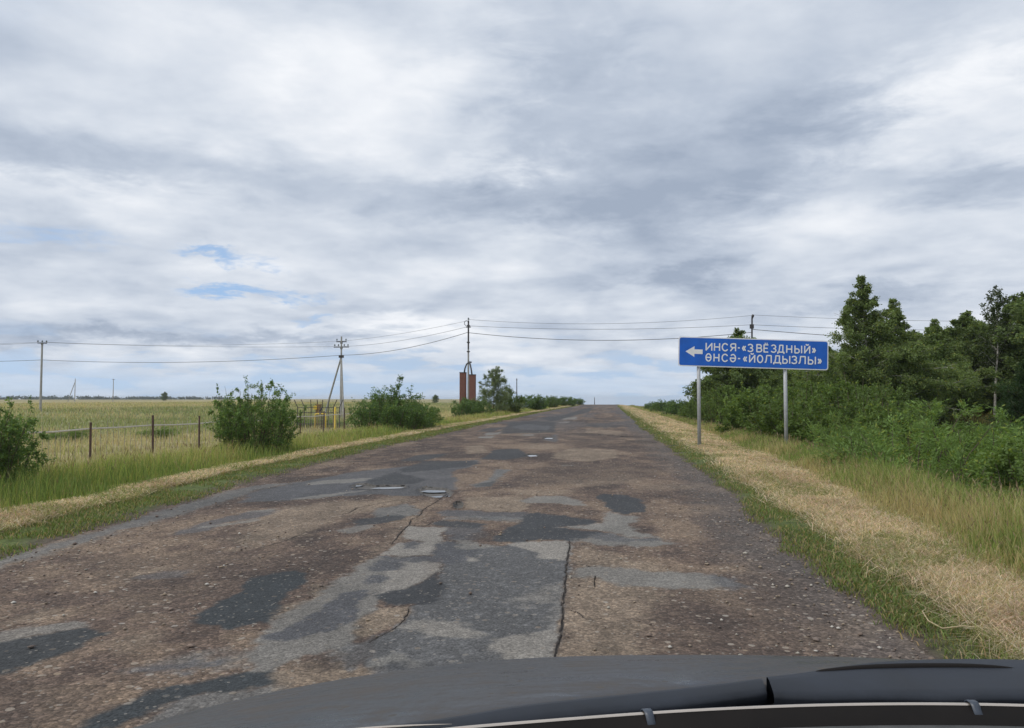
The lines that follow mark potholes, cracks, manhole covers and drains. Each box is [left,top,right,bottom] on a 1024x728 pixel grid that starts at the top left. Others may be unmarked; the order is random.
pothole [415,486,456,498]
crack [368,608,412,643]
crack [342,493,449,544]
pothole [449,500,467,509]
